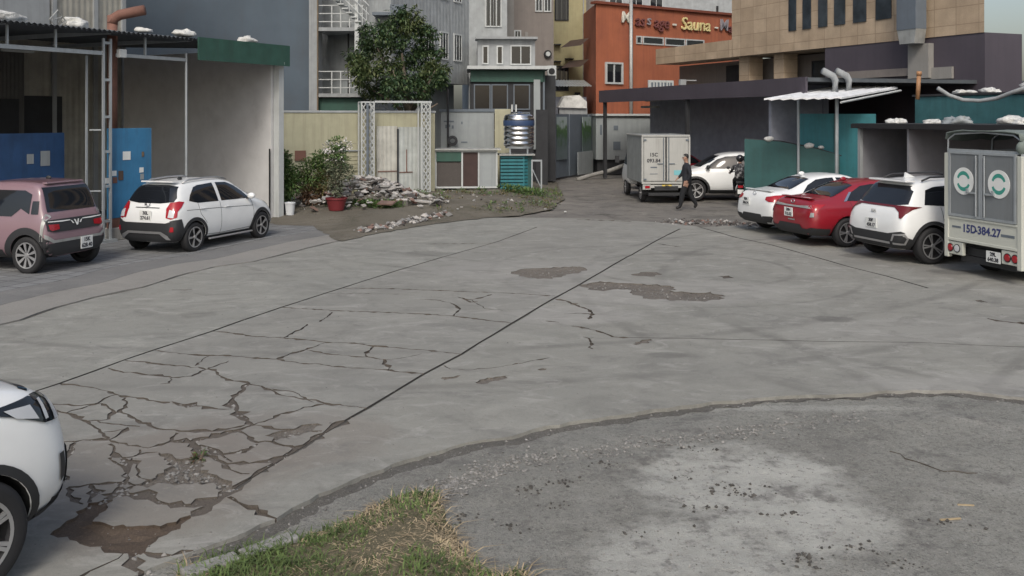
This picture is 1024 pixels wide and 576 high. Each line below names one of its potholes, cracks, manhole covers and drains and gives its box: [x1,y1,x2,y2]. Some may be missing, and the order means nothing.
crack [53,288,629,576]
